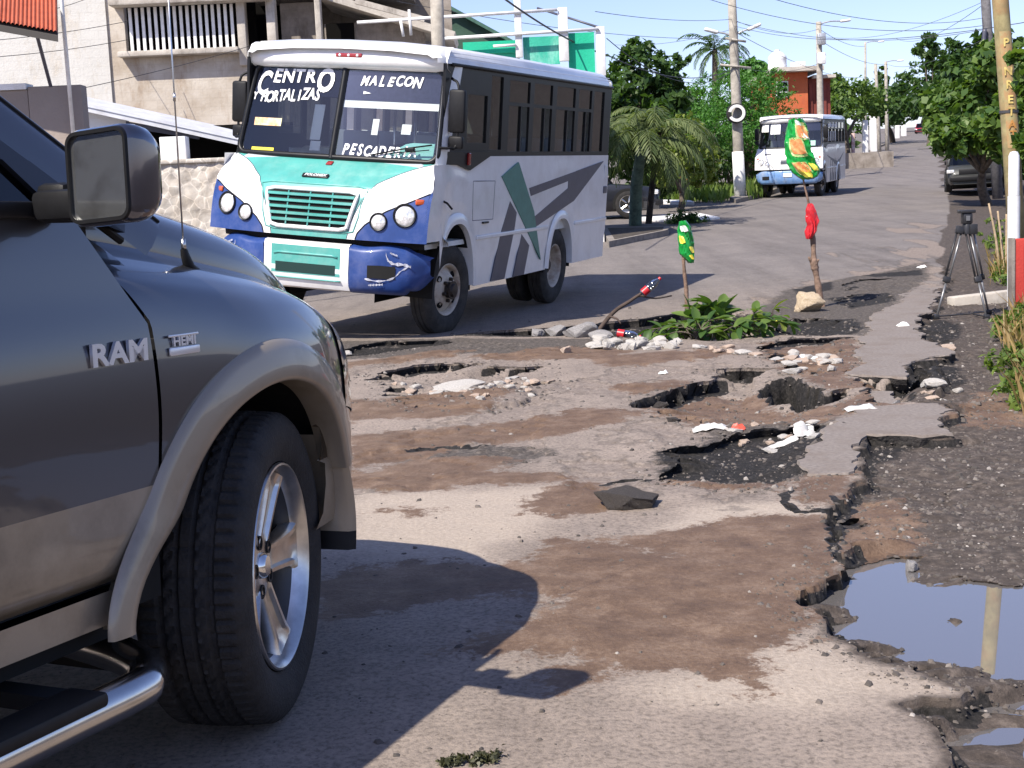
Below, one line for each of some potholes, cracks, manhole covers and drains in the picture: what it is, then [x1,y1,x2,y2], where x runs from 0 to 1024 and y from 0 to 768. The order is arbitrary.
pothole [846,366,951,403]
pothole [364,362,558,409]
pothole [345,340,461,357]
crack [782,503,843,560]
pothole [800,556,1024,711]
pothole [657,425,826,489]
pothole [640,367,871,428]
